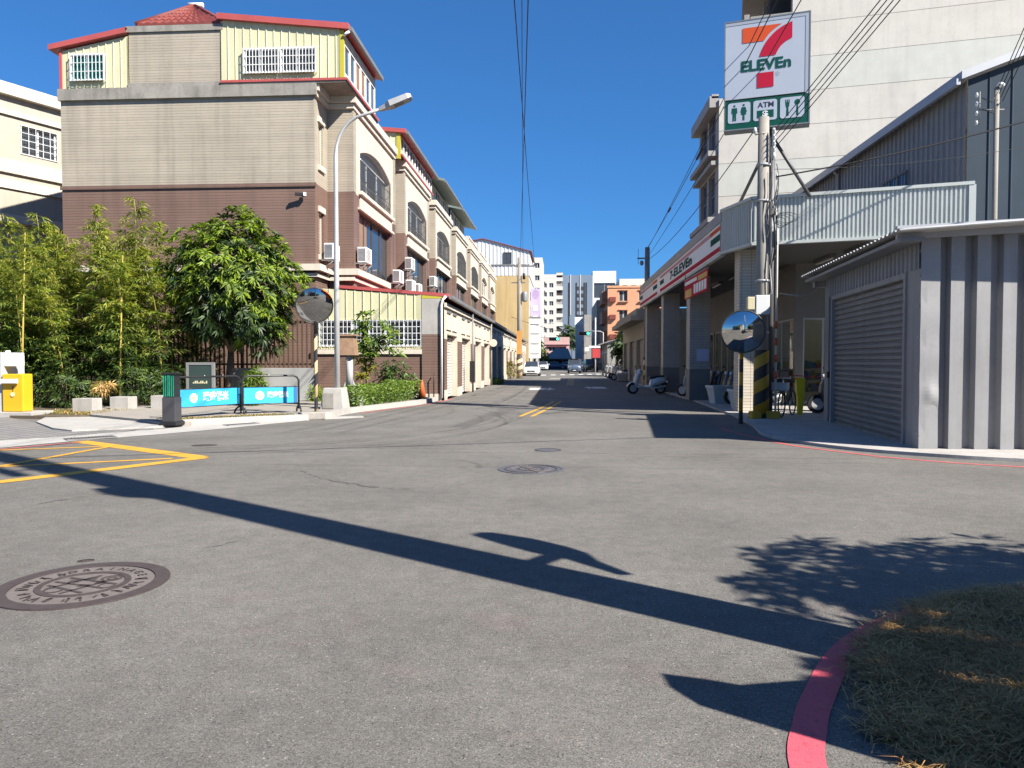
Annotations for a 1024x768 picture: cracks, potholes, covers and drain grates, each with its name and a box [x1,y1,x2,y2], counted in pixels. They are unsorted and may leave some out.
crack [303,471,461,491]
manhole cover [498,464,564,474]
manhole cover [0,562,171,611]
